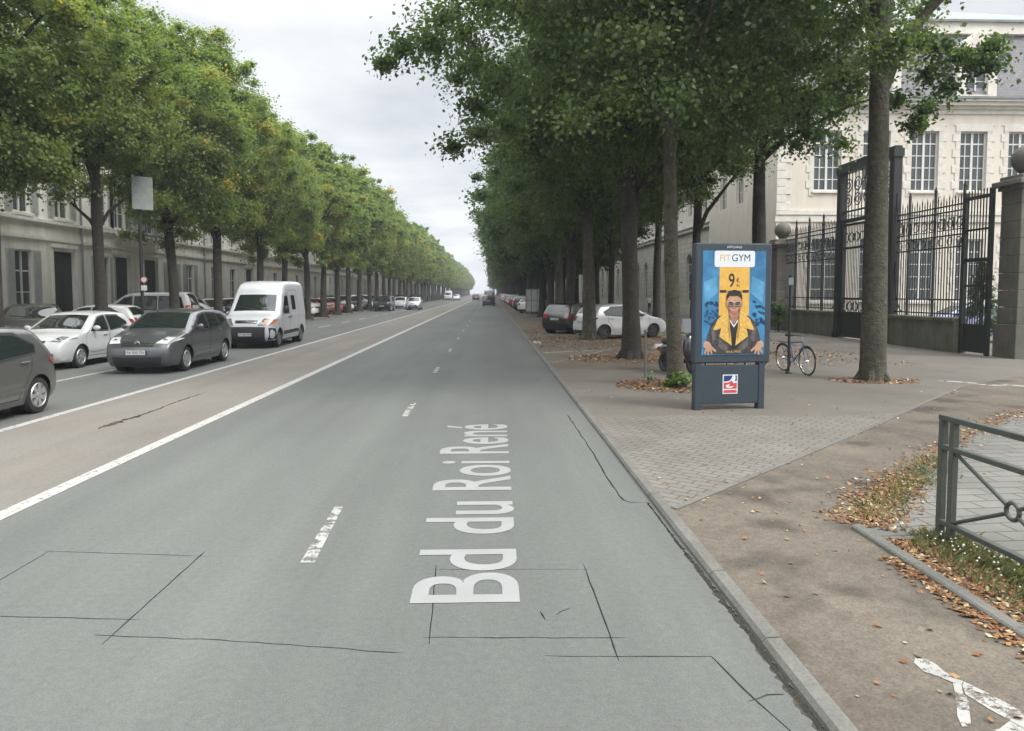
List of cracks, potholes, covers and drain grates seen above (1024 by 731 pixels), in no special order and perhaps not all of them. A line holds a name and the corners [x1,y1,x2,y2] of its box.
crack [99,393,202,429]
